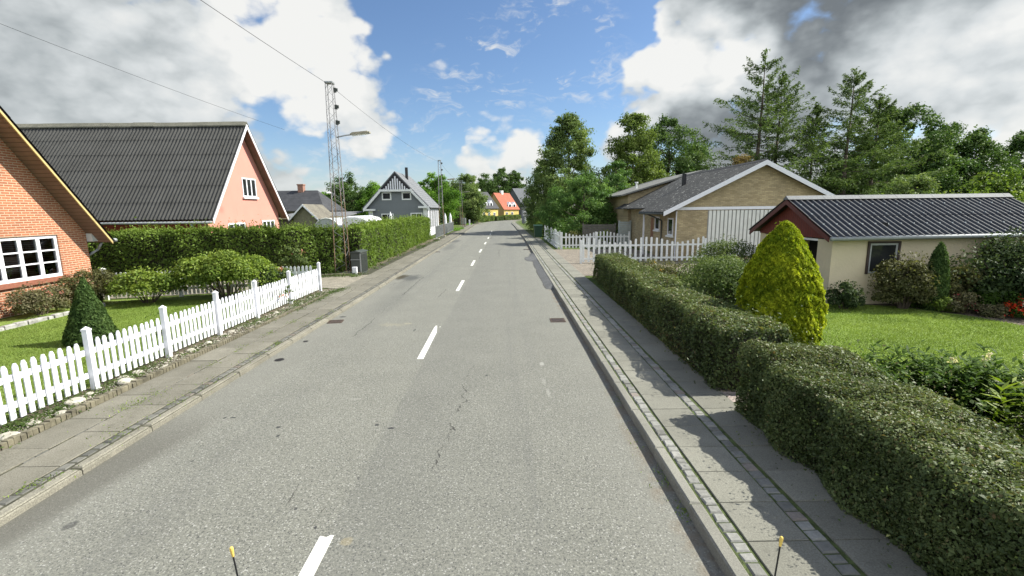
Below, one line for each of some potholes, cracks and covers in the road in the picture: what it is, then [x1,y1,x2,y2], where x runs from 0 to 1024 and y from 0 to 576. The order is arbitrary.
crack [435,366,474,465]
